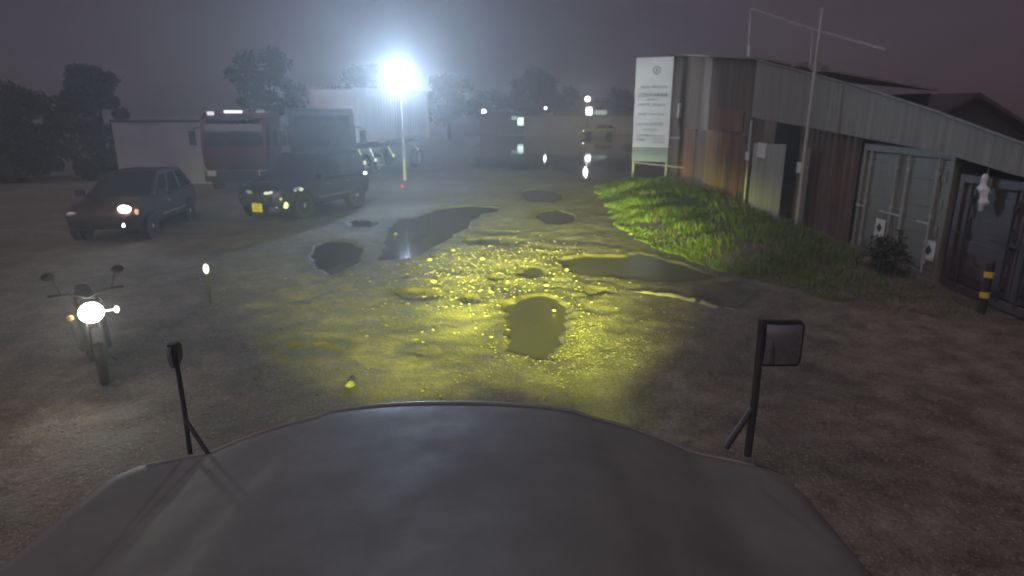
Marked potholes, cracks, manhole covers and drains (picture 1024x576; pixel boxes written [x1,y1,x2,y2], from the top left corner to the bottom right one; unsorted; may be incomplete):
pothole [395,287,446,302]
pothole [520,188,564,202]
pothole [461,237,532,247]
pothole [536,210,578,225]
pothole [513,266,547,278]
pothole [307,239,365,275]
pothole [501,293,573,360]
pothole [376,205,501,260]
pothole [345,218,383,228]
pothole [556,251,719,282]
